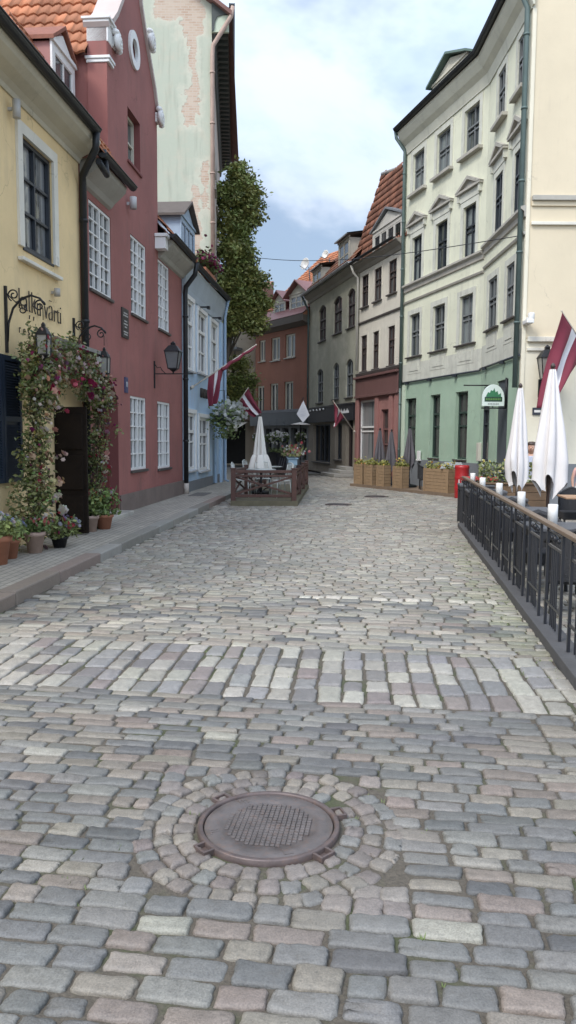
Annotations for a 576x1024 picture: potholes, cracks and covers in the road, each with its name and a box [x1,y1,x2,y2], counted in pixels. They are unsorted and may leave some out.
manhole cover [193,791,347,868]
